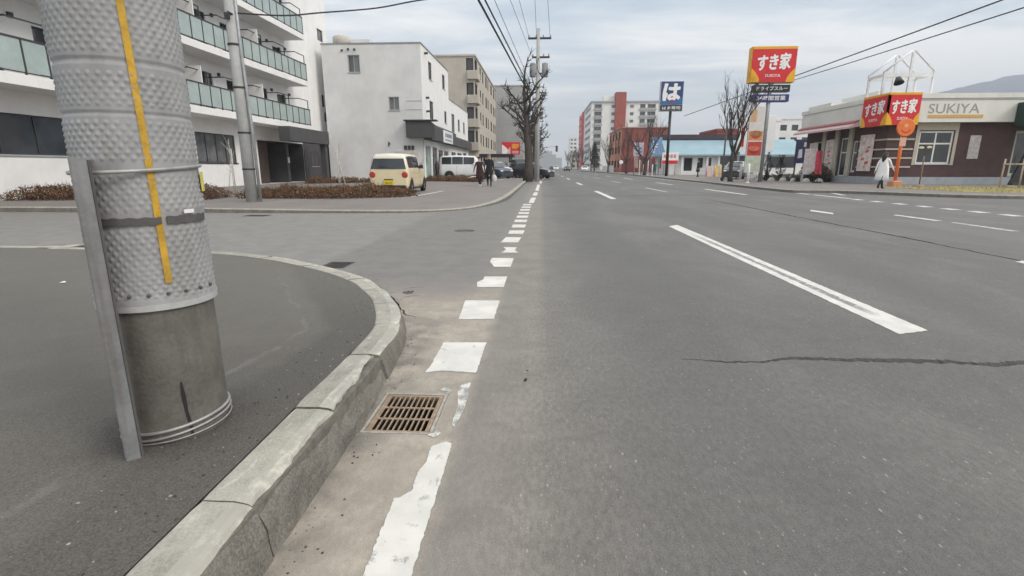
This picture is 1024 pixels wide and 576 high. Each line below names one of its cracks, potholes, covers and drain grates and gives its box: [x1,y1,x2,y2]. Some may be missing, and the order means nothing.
crack [690,357,1024,367]
drain grate [359,393,449,435]
